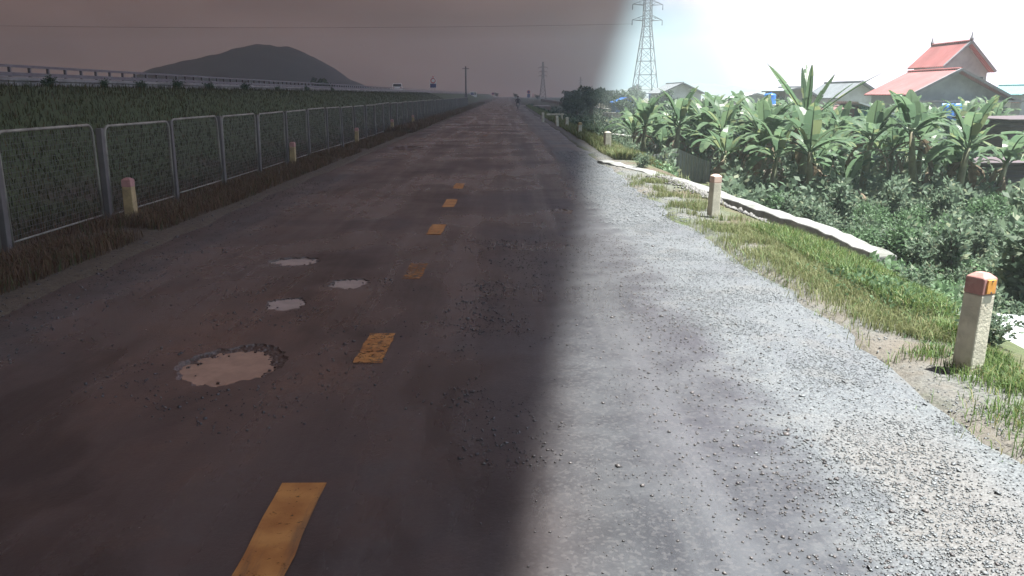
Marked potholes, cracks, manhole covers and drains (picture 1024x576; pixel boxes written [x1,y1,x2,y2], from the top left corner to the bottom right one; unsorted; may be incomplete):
pothole [173,343,289,387]
pothole [327,278,370,289]
pothole [265,297,307,311]
pothole [268,257,320,266]
